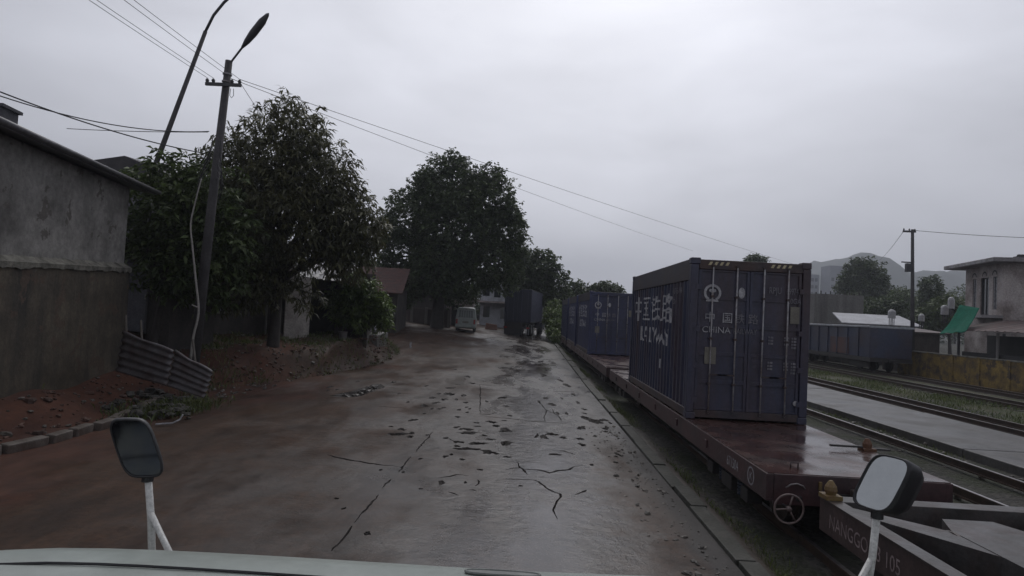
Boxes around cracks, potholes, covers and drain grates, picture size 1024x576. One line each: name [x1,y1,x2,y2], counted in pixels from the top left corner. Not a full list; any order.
crack [329,455,398,467]
pothole [330,384,385,397]
crack [471,375,573,425]
crack [507,450,587,518]
